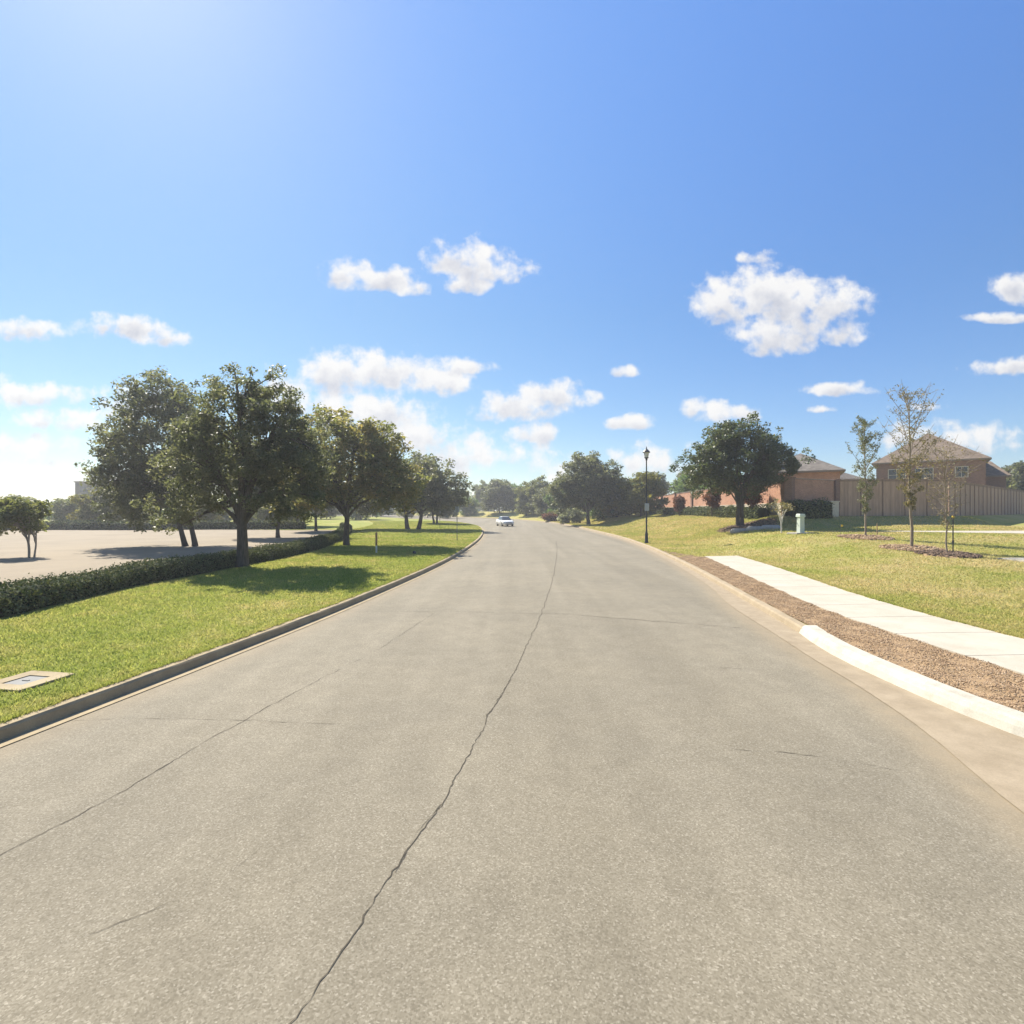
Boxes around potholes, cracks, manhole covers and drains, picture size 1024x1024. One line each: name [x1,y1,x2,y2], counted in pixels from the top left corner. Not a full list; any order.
crack [0,553,737,1024]
